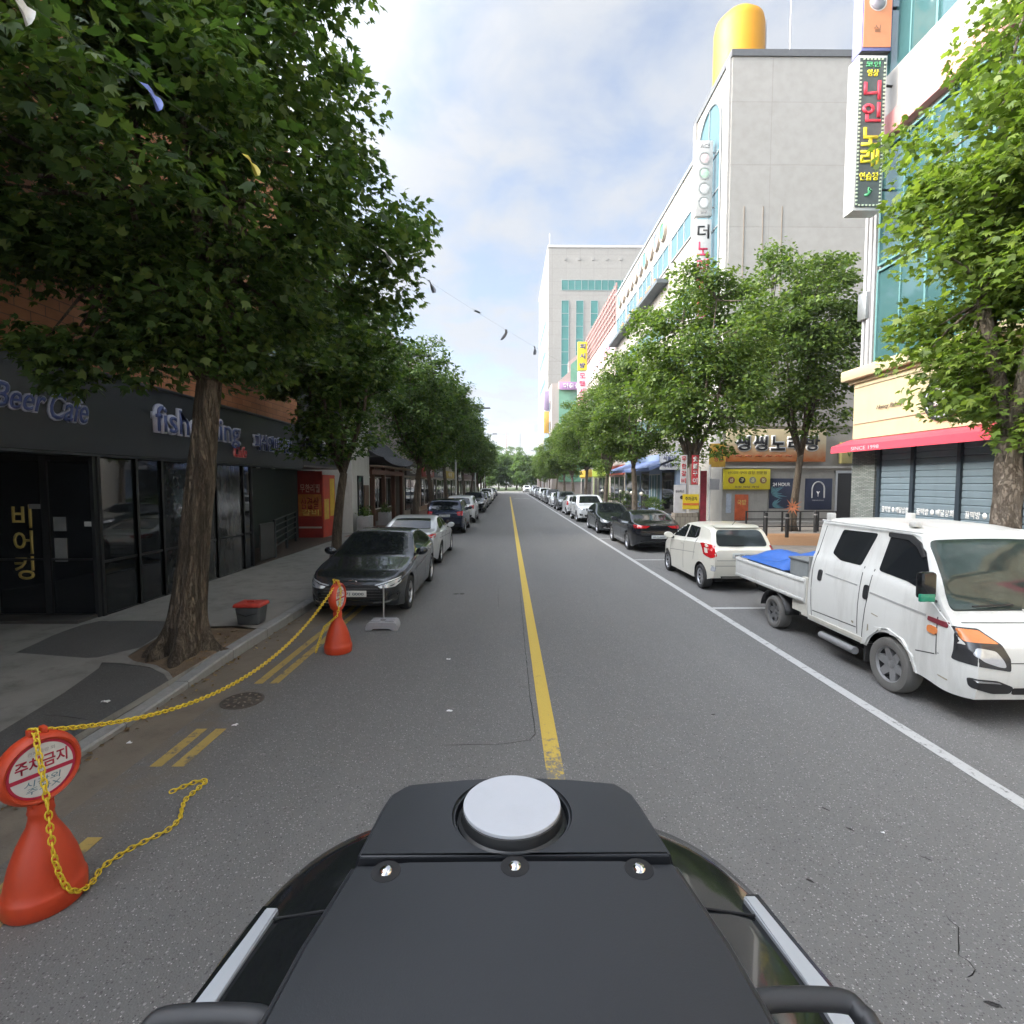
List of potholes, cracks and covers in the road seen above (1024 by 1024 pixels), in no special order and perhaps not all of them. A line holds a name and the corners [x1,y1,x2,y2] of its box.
crack [946,915,975,978]
crack [461,595,536,745]
manhole cover [219,692,265,710]
